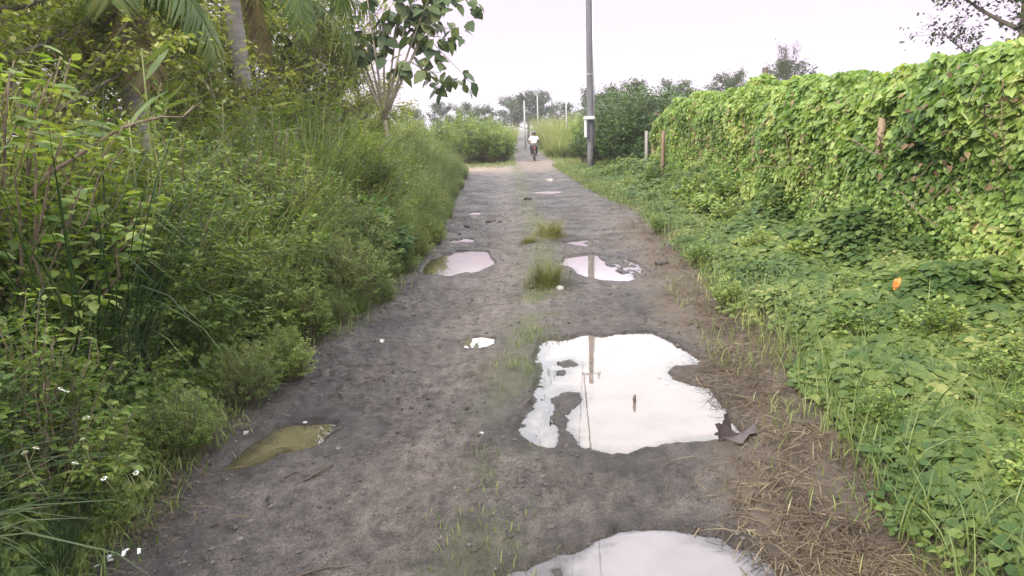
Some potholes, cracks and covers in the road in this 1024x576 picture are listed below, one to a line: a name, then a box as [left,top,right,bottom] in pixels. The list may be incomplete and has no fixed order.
pothole [455,335,497,348]
pothole [481,518,795,576]
pothole [550,252,658,282]
pothole [509,329,751,457]
pothole [206,415,346,476]
pothole [417,249,498,277]
